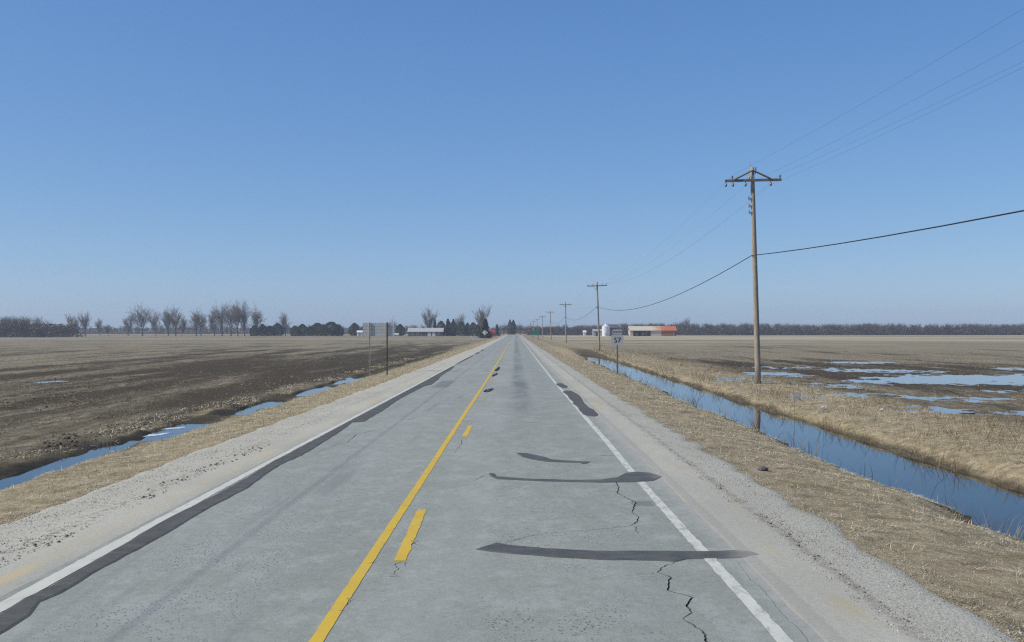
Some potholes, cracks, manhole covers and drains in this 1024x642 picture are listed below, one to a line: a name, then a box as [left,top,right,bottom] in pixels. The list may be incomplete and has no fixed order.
crack [657,563,708,642]
crack [506,482,639,543]
